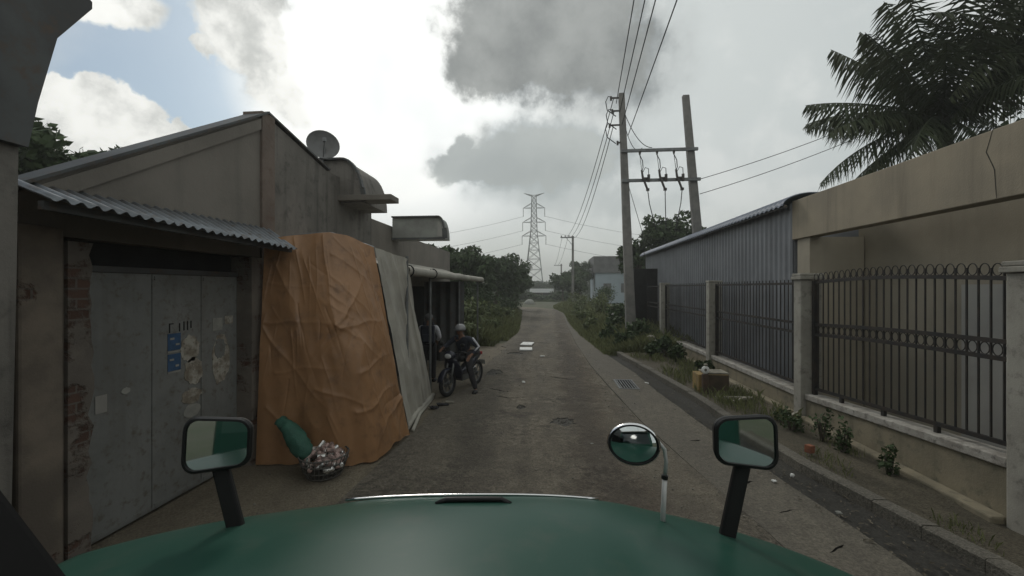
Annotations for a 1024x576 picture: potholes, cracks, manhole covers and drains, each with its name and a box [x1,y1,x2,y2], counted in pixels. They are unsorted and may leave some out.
drain grate [613,379,640,389]
pothole [550,417,576,427]
